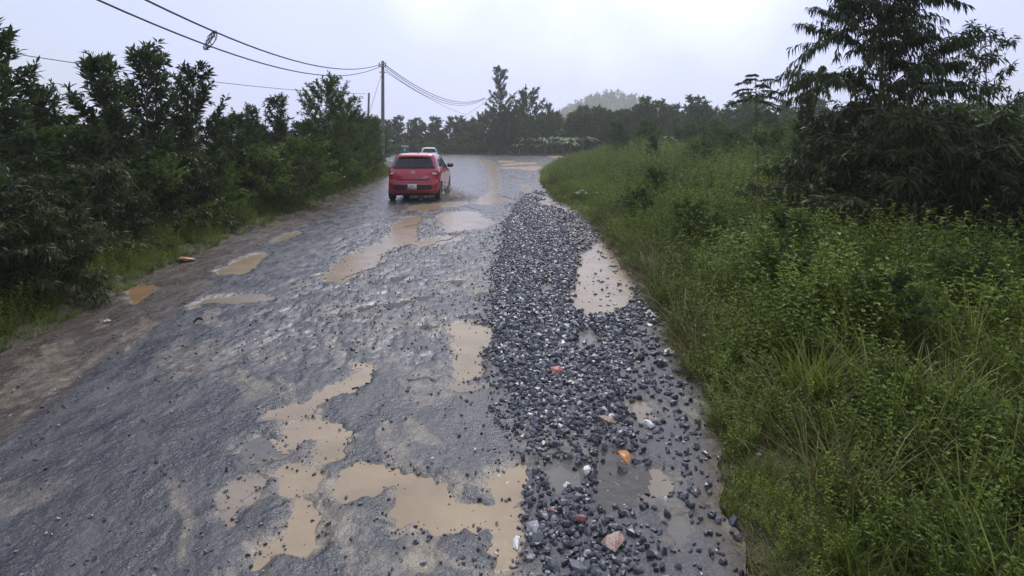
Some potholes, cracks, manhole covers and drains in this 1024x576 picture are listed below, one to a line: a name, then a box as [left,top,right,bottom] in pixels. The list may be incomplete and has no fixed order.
pothole [435,211,498,233]
pothole [389,465,540,576]
pothole [265,363,377,424]
pothole [274,232,302,242]
pothole [215,253,269,275]
pothole [332,461,421,504]
pothole [319,215,422,284]
pothole [251,463,324,571]
pothole [441,322,493,384]
pothole [270,419,353,469]
pothole [569,241,637,314]
